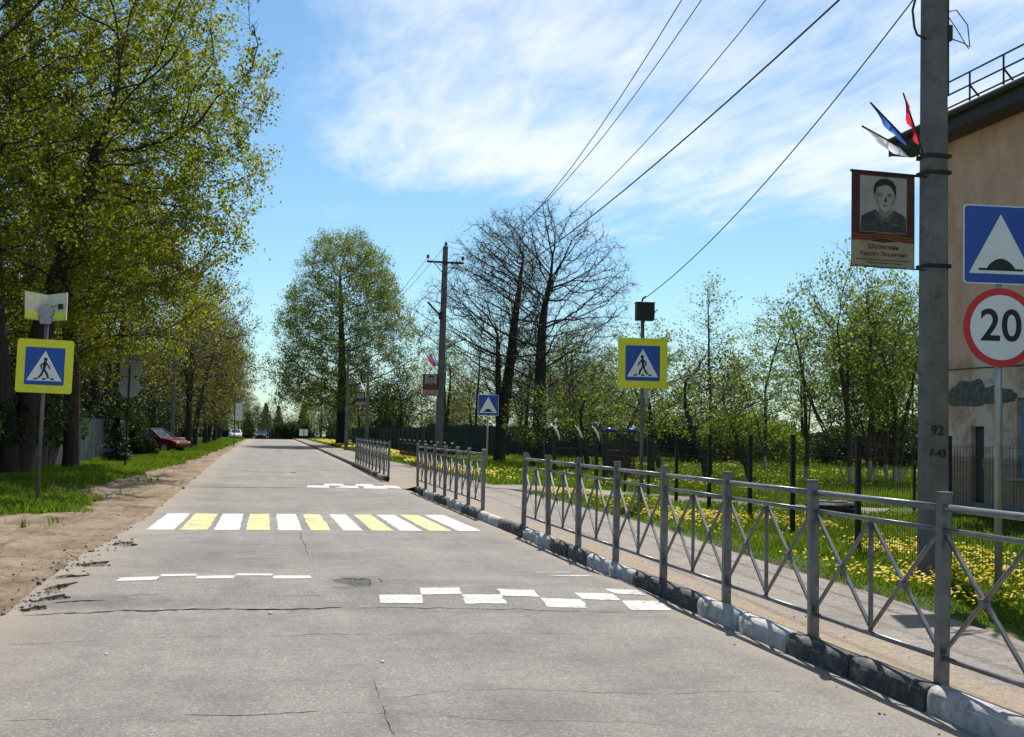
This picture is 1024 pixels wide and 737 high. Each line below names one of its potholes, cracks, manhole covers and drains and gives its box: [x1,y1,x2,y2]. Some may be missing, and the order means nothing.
crack [359,679,449,734]
pothole [327,576,382,589]
crack [25,594,343,616]
